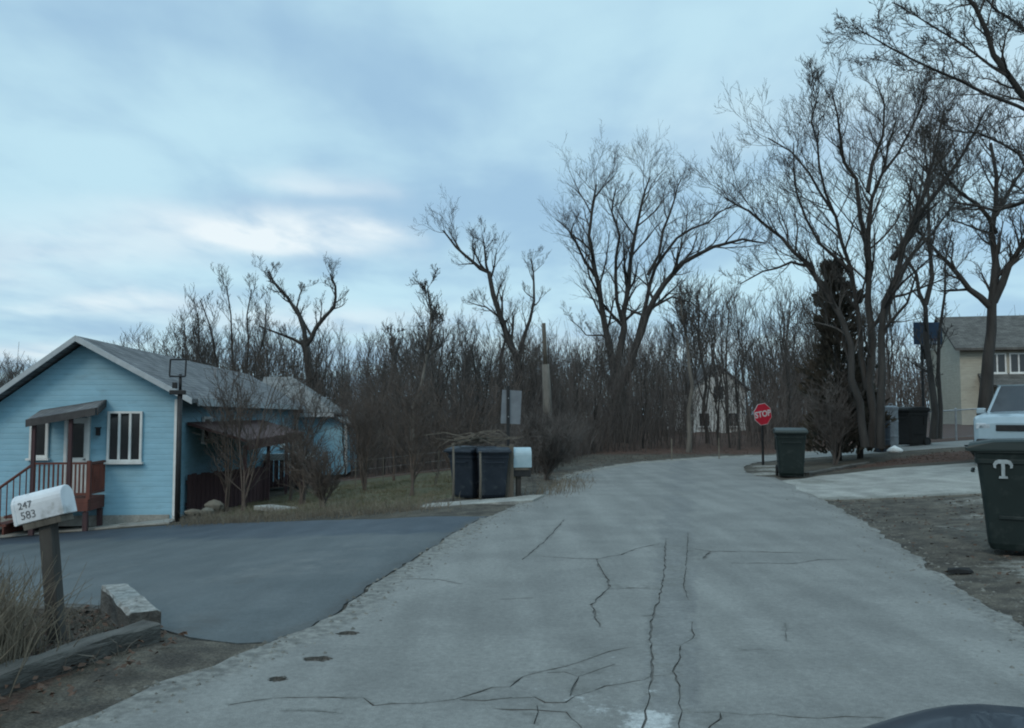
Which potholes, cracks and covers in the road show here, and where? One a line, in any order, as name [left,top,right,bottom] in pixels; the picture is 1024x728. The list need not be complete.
crack [231,647,641,728]
crack [522,520,695,728]
crack [683,535,816,597]
